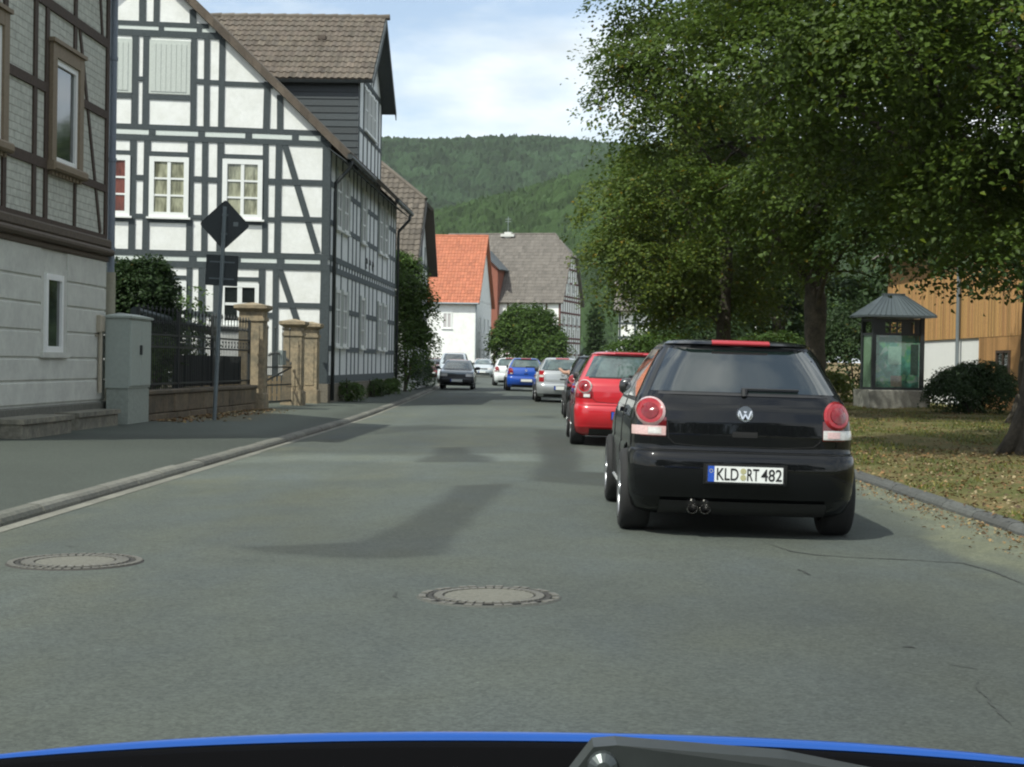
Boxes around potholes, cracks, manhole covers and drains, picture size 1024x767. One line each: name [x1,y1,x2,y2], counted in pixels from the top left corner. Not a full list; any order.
crack [767,543,1023,584]
manhole cover [416,585,562,608]
manhole cover [5,553,144,571]
crack [951,664,1011,724]
